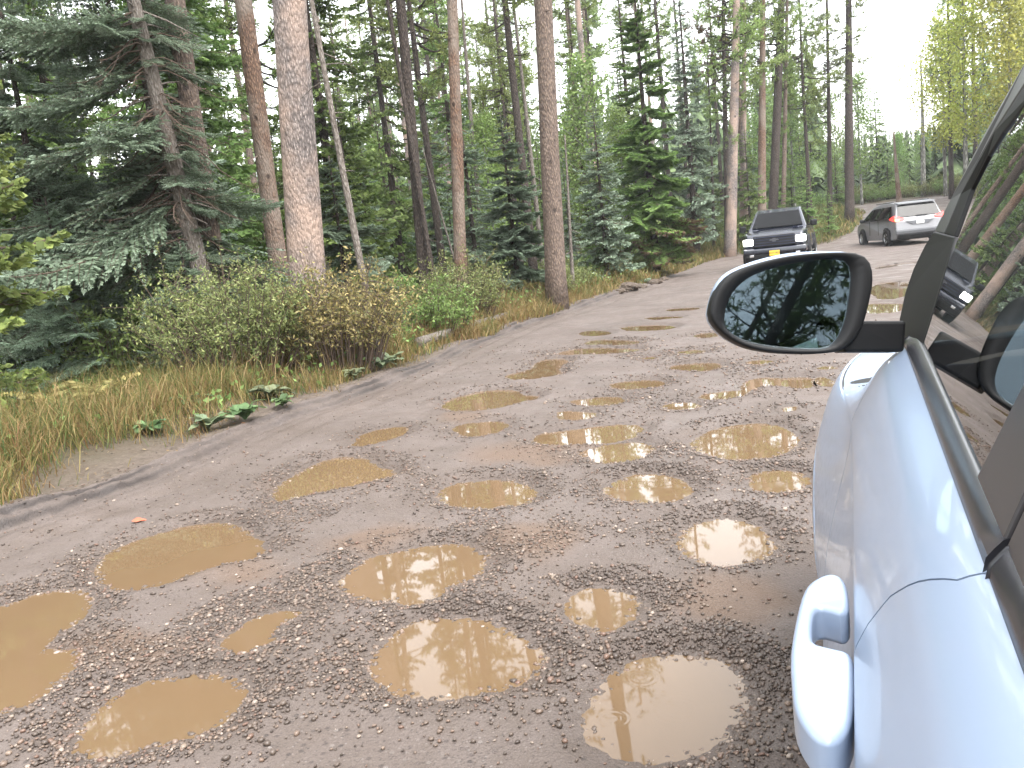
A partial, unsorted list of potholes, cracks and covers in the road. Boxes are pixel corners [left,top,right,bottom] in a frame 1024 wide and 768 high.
pothole [87,520,270,592]
pothole [503,358,570,380]
pothole [742,468,813,494]
pothole [0,586,102,716]
pothole [528,423,648,445]
pothole [61,667,257,763]
pothole [571,648,761,768]
pothole [439,389,543,411]
pothole [597,471,699,504]
pothole [360,613,557,705]
pothole [685,422,805,460]
pothole [433,478,544,509]
